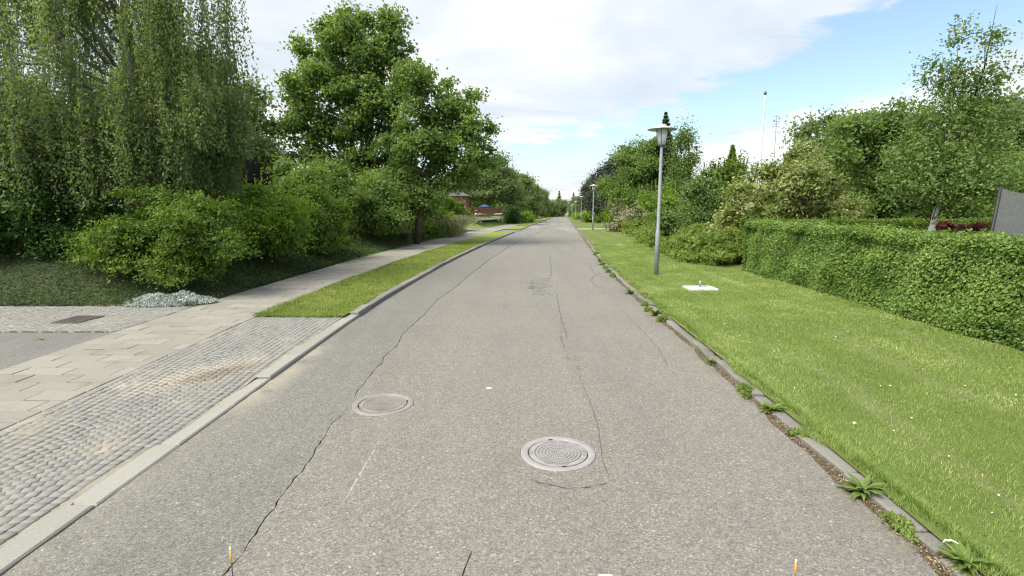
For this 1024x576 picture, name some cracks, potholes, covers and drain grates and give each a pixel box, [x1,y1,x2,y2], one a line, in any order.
manhole cover [352,393,414,416]
crack [355,230,543,395]
manhole cover [520,437,596,472]
crack [528,260,609,489]
crack [222,413,347,576]
